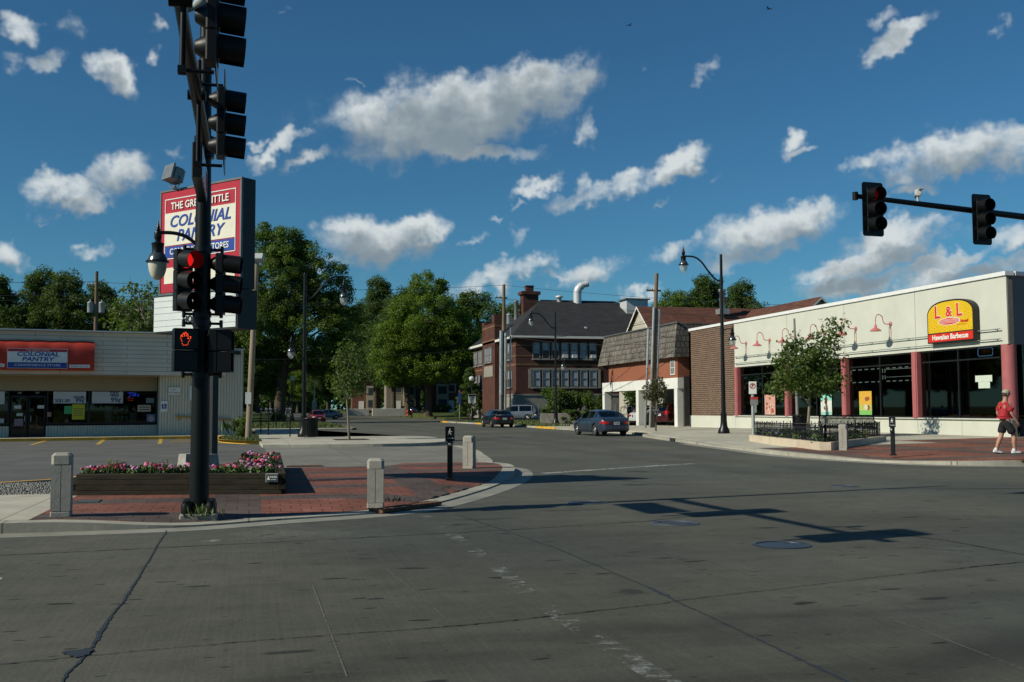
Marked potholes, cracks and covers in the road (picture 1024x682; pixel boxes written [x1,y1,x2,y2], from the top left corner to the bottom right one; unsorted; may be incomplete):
manhole cover [752,541,812,549]
